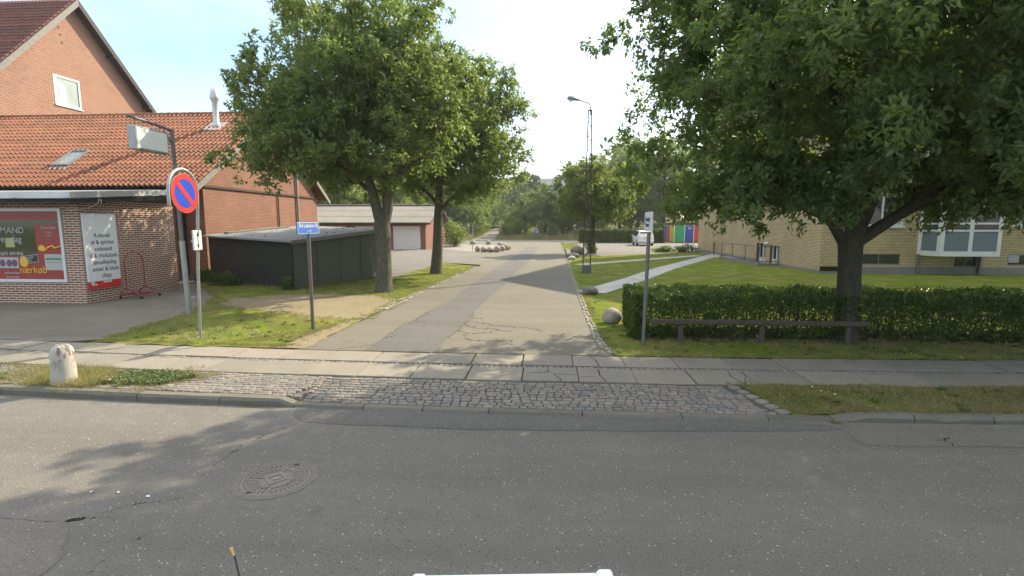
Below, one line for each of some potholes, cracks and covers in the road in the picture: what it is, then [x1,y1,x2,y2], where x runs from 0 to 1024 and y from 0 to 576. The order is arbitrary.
crack [448,313,540,345]
manhole cover [230,460,319,500]
crack [91,497,178,520]
crack [531,356,606,381]
